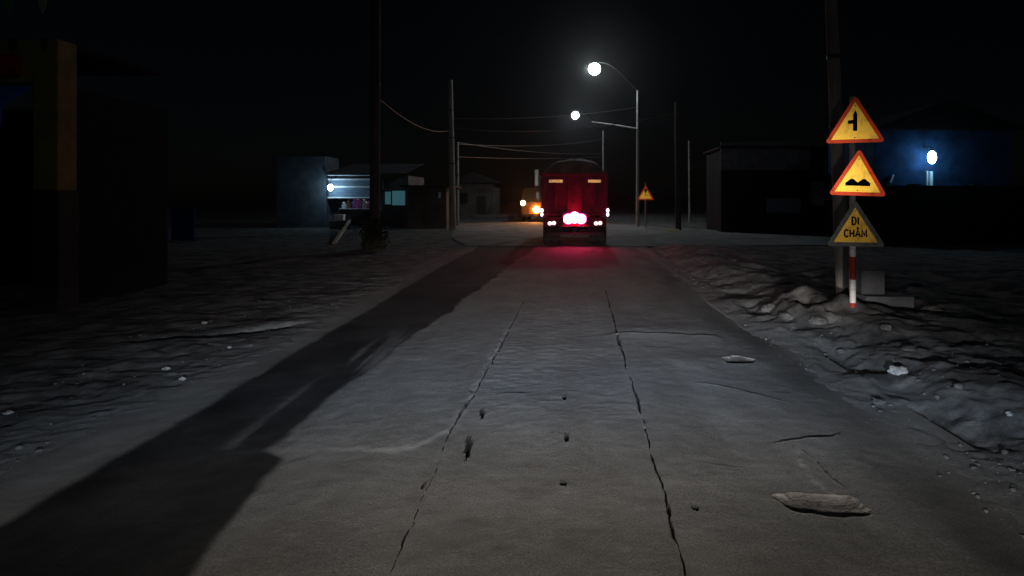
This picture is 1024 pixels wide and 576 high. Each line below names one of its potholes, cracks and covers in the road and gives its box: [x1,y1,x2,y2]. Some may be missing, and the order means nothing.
pothole [461,435,475,461]
crack [386,300,527,576]
crack [767,431,851,490]
crack [602,289,790,576]
